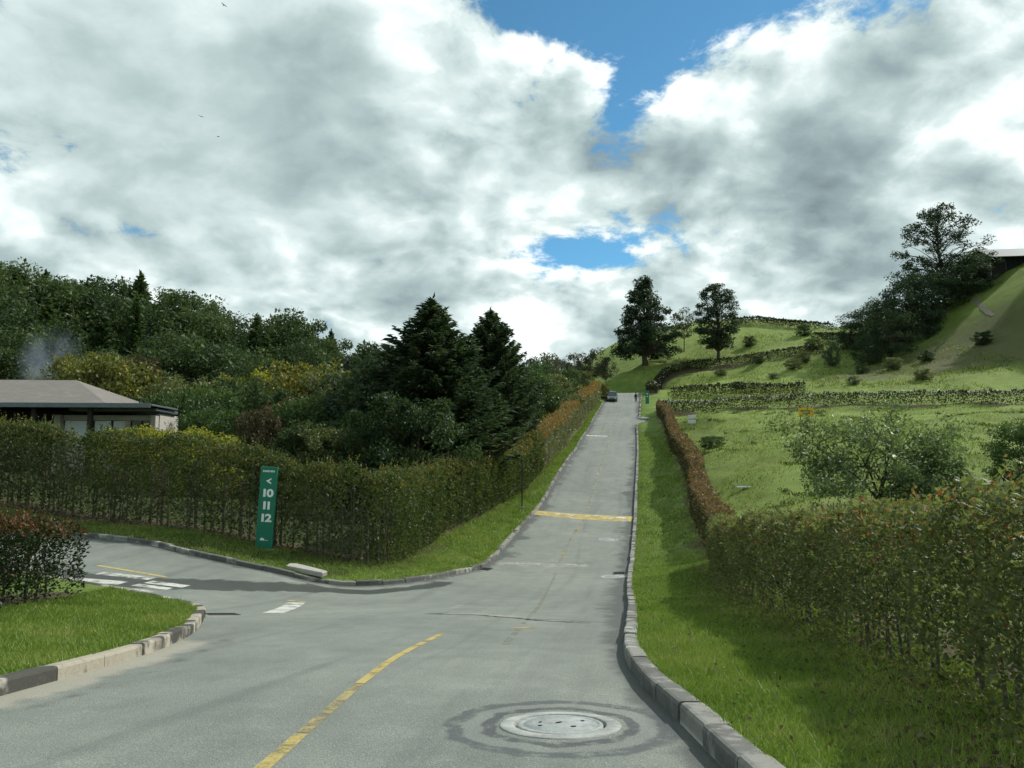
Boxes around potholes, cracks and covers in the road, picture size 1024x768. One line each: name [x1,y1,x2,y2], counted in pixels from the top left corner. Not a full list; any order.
manhole cover [499,712,622,740]
